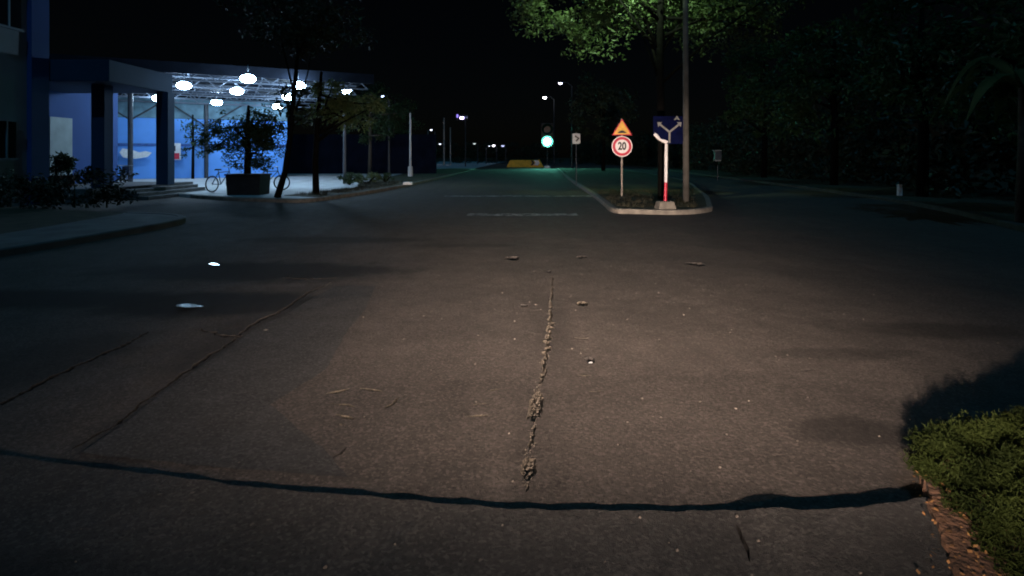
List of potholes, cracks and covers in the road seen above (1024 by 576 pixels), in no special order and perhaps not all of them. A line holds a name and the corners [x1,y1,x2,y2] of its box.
crack [736,524,751,563]
crack [526,276,555,488]
